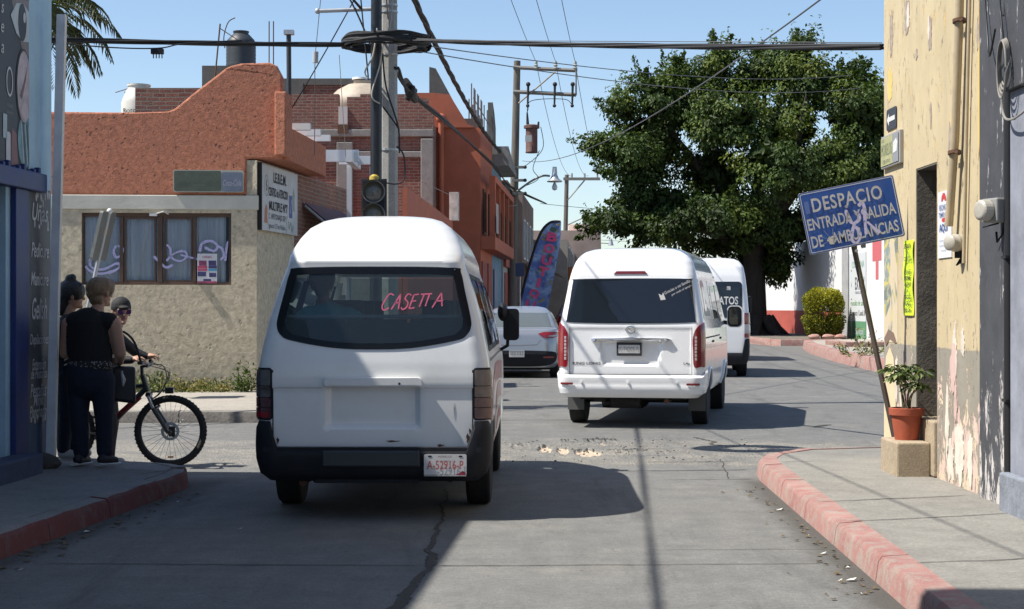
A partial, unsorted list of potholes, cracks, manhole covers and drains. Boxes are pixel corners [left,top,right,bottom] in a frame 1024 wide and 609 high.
pothole [580,437,624,447]
crack [386,488,788,609]
pothole [554,444,574,456]
pothole [572,447,611,458]
pothole [535,444,556,455]
